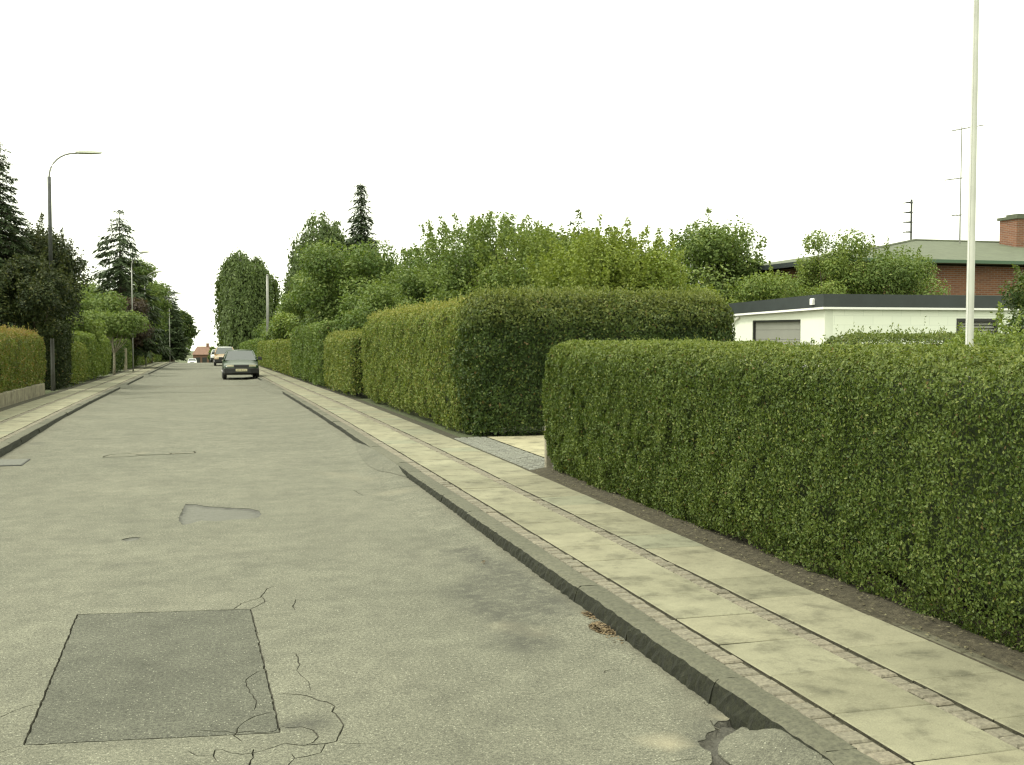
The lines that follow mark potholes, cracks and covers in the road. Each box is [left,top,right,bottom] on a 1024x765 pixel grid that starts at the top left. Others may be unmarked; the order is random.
pothole [698,720,736,765]
pothole [178,504,261,525]
crack [190,654,344,765]
